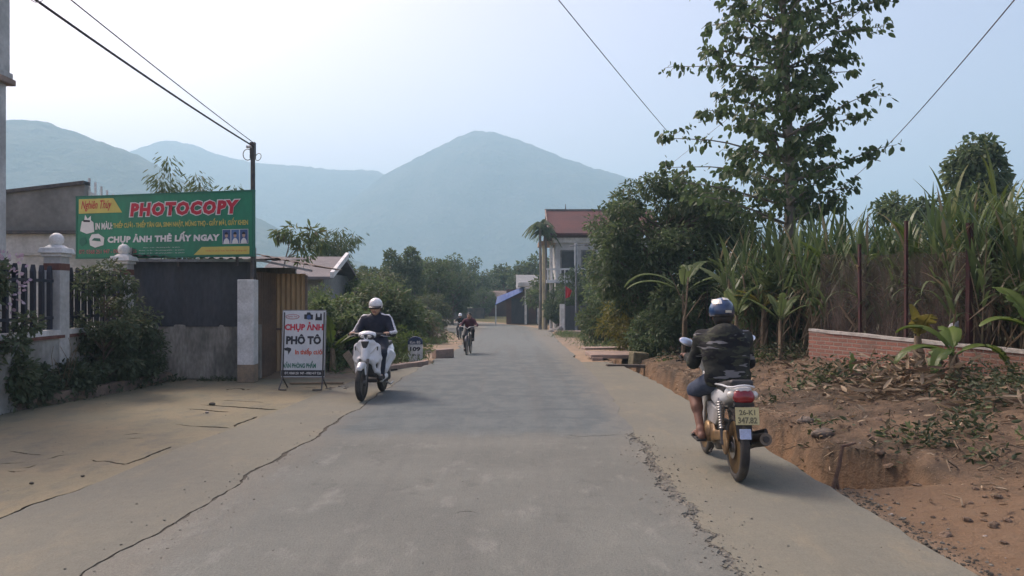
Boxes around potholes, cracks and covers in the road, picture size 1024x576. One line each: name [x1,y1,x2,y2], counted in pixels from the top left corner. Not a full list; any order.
crack [628,434,747,576]
crack [0,490,78,519]
crack [80,382,397,576]
